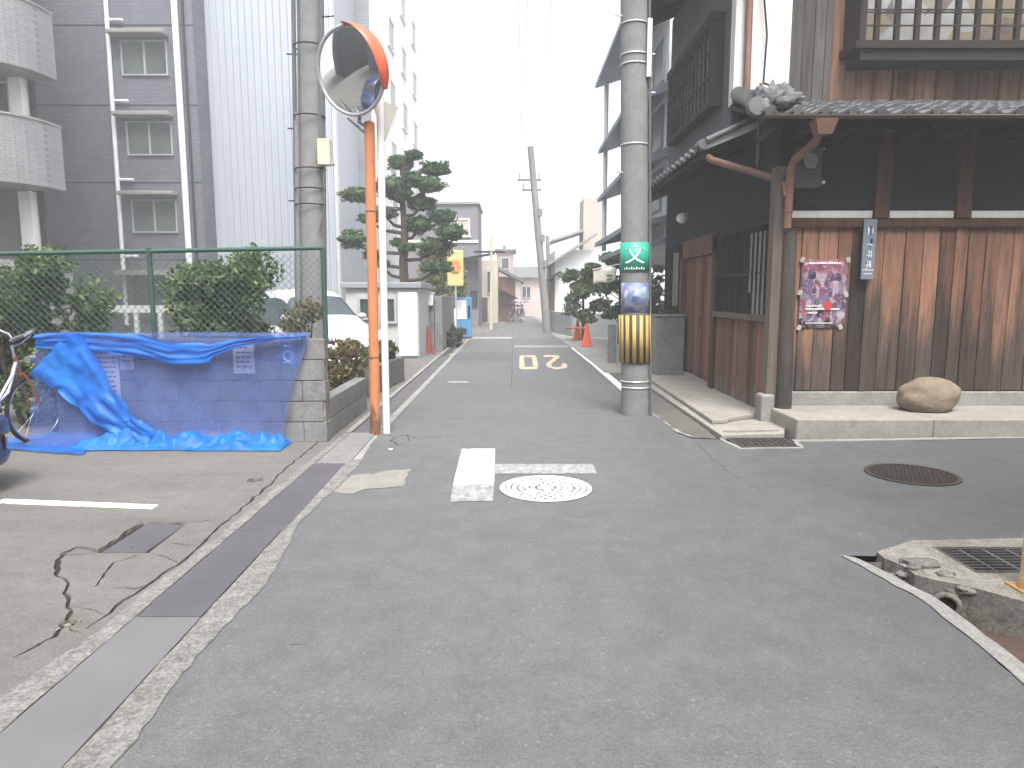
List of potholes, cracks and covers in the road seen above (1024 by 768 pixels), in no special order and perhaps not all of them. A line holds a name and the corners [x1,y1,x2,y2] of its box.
manhole cover [500,475,592,502]
manhole cover [864,463,963,487]
drain grate [726,438,800,448]
crack [13,442,318,658]
drain grate [934,547,1022,573]
